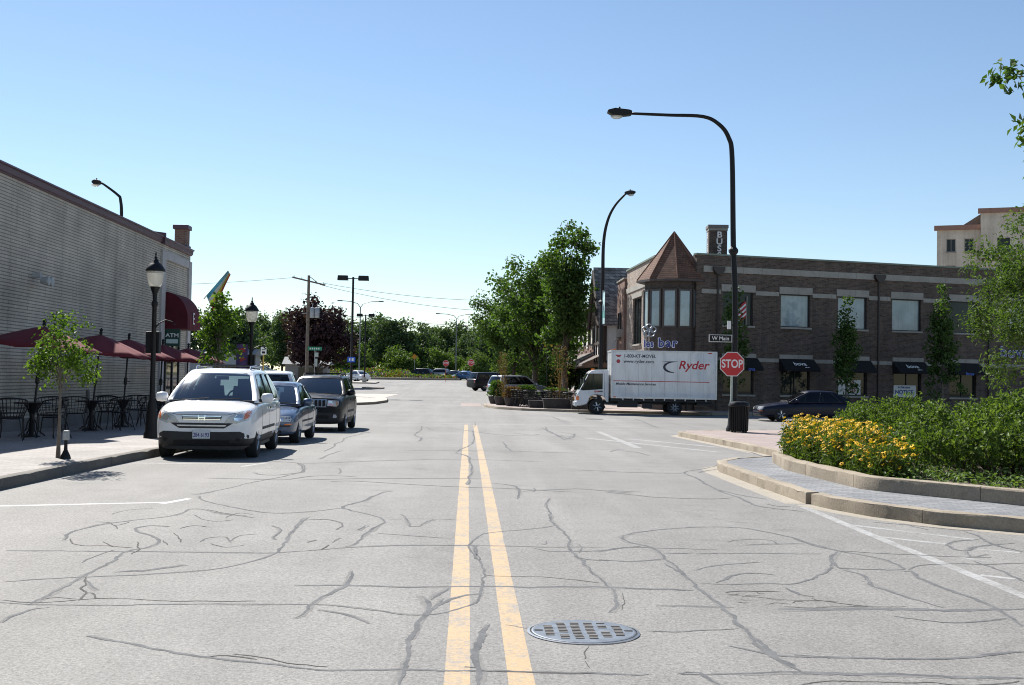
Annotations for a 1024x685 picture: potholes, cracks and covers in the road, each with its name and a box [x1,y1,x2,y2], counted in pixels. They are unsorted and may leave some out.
crack [295,575,692,609]
crack [88,609,648,675]
crack [6,433,991,600]
manhole cover [527,620,640,645]
crack [502,416,576,451]
